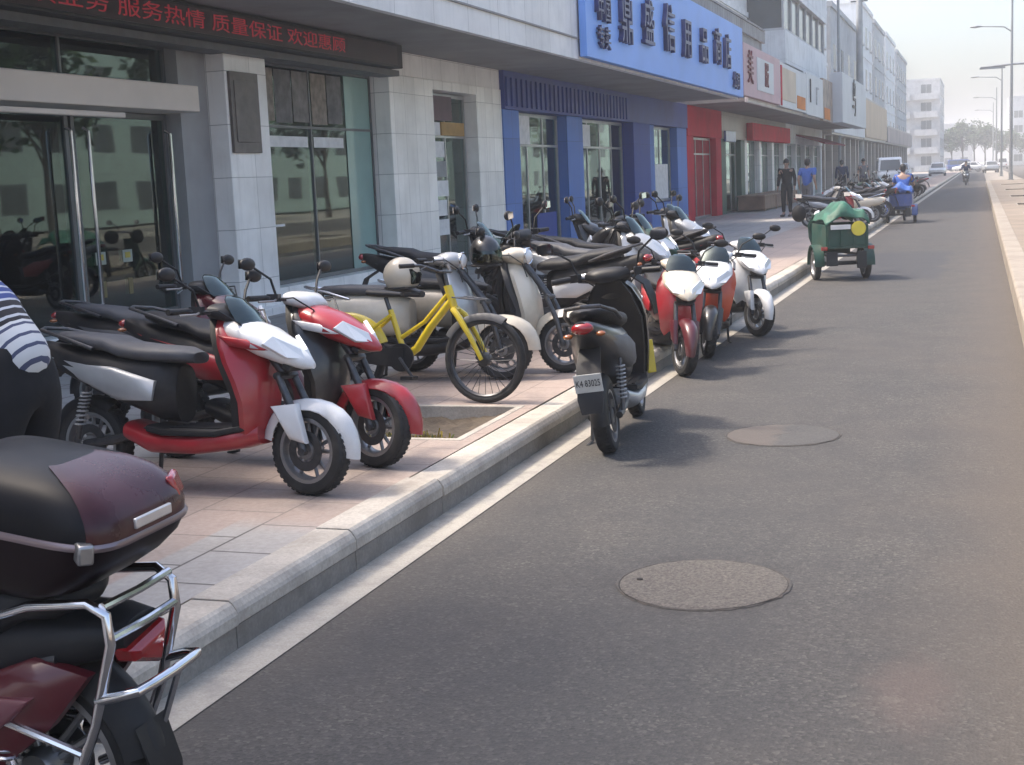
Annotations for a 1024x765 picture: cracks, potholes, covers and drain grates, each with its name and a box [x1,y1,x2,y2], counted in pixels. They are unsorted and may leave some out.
manhole cover [724,424,842,447]
manhole cover [615,559,793,612]
